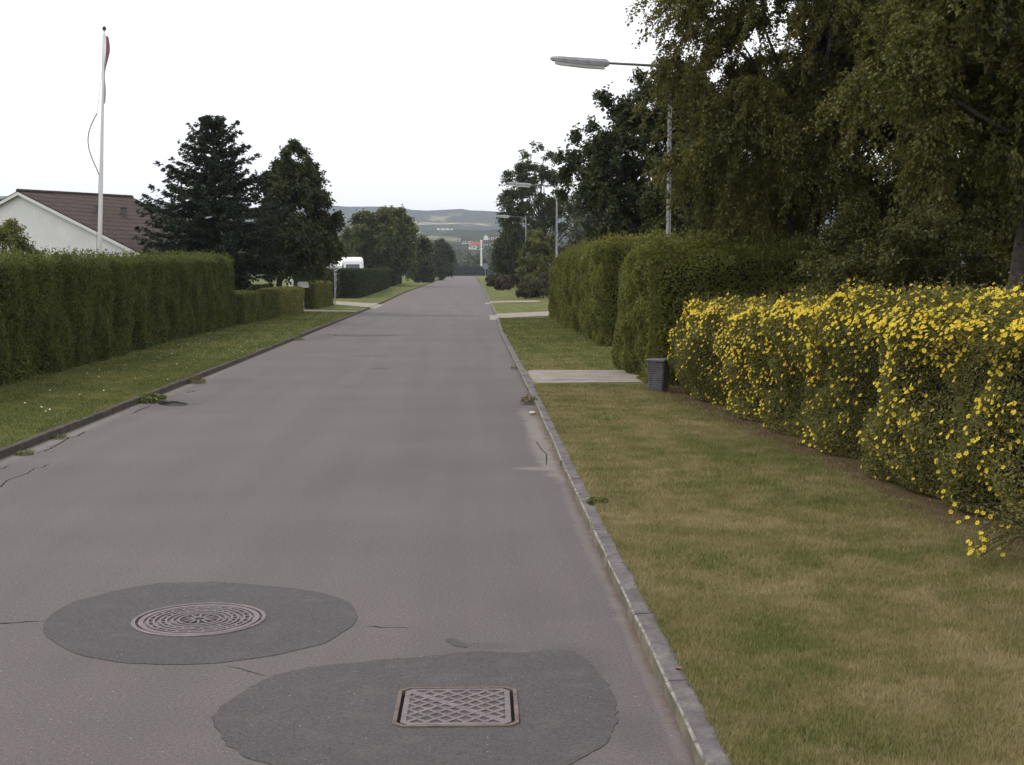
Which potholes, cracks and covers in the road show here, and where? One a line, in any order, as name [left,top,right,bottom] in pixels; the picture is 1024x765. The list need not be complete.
manhole cover [131,602,266,637]
crack [0,432,85,487]
